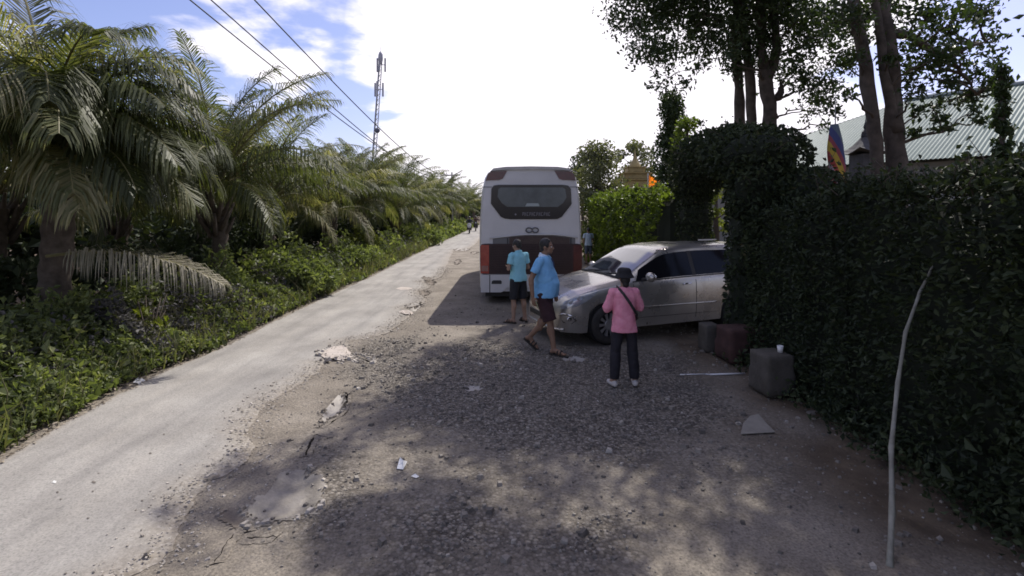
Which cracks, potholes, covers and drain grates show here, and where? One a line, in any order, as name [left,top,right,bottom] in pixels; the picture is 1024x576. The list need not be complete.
pothole [317,392,351,427]
pothole [237,464,328,530]
crack [299,391,352,457]
crack [204,521,283,567]
